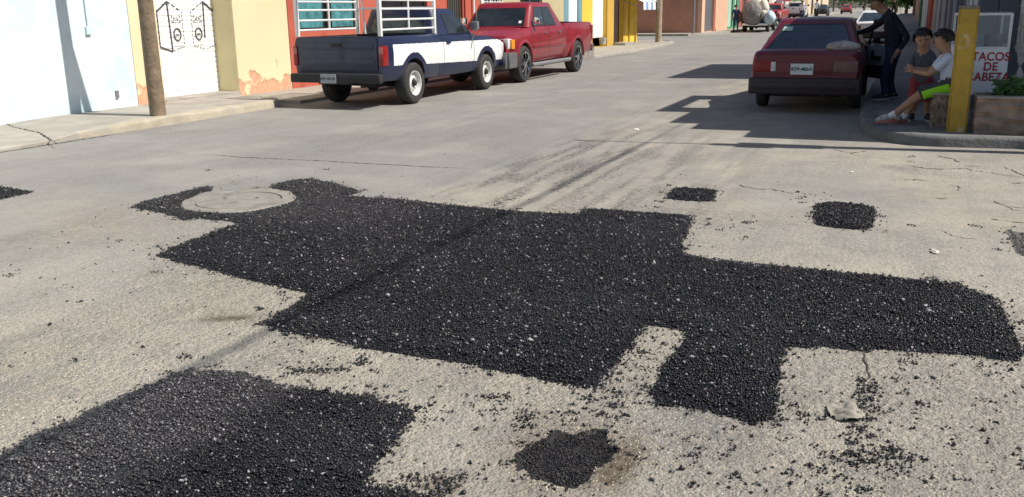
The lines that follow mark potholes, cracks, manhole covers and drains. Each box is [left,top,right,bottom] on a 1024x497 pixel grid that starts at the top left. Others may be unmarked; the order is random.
crack [848,352,871,438]
manhole cover [181,189,296,213]
crack [903,155,1023,199]
